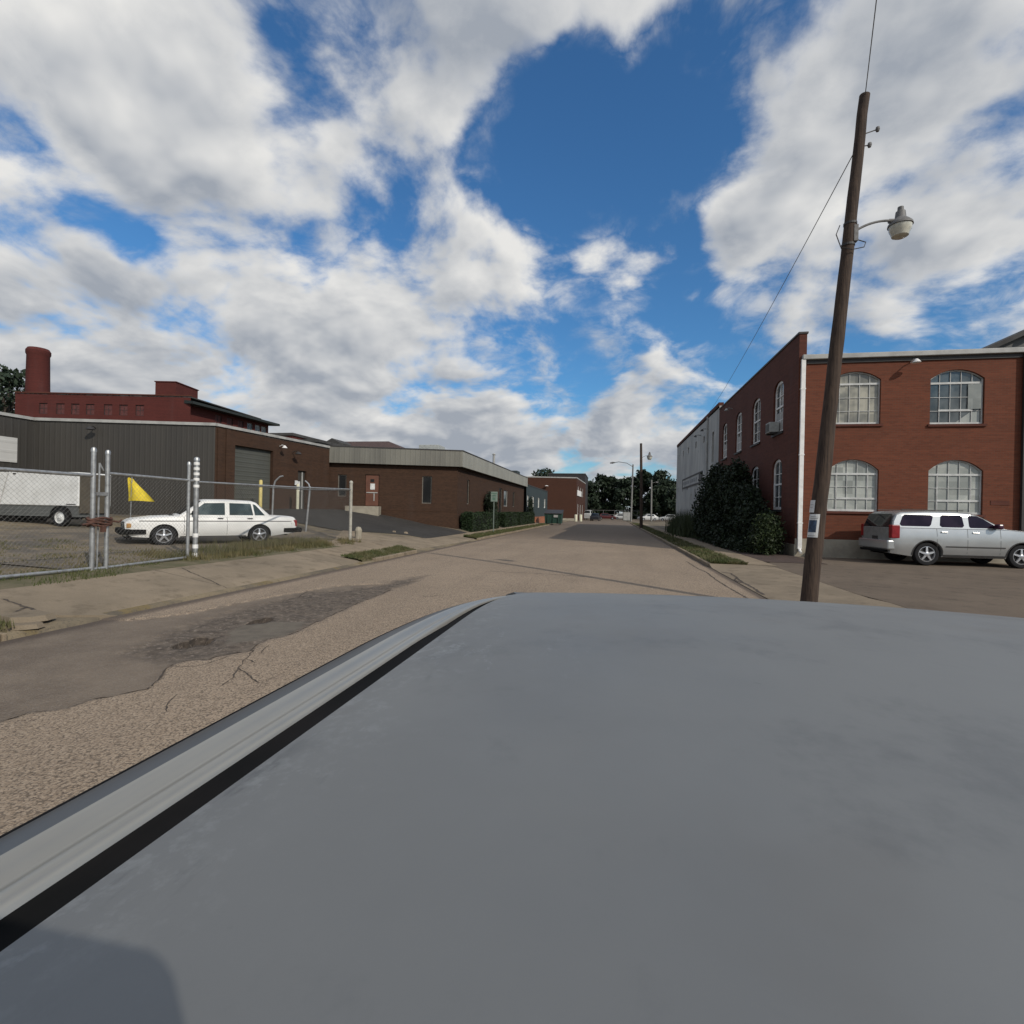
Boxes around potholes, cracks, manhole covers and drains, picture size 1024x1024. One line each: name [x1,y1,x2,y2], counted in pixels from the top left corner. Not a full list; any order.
pothole [173,638,217,650]
crack [3,590,390,721]
